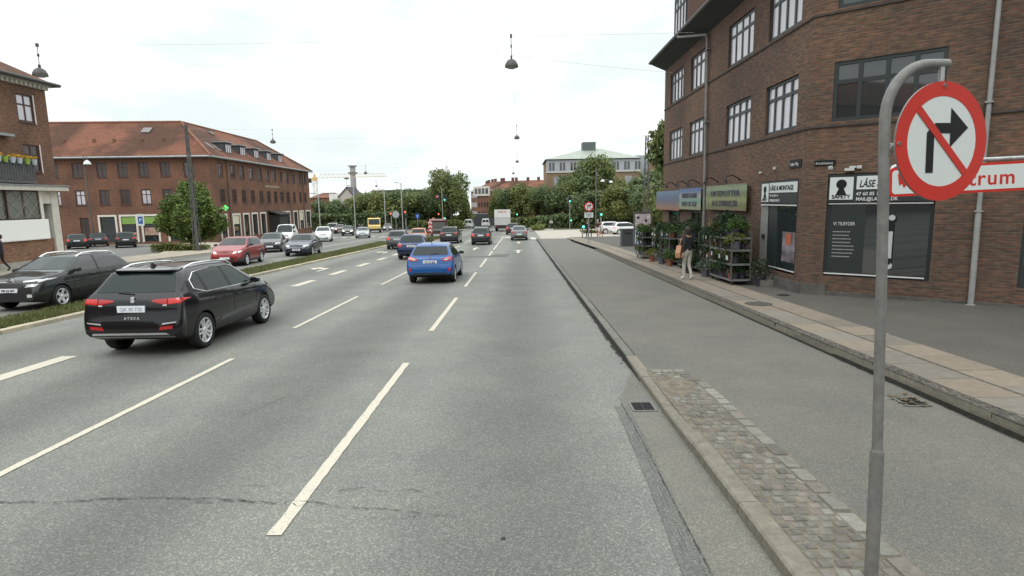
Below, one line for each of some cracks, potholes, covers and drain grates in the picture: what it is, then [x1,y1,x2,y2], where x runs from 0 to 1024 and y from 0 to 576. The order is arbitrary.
crack [0,485,456,518]
drain grate [628,401,658,412]
